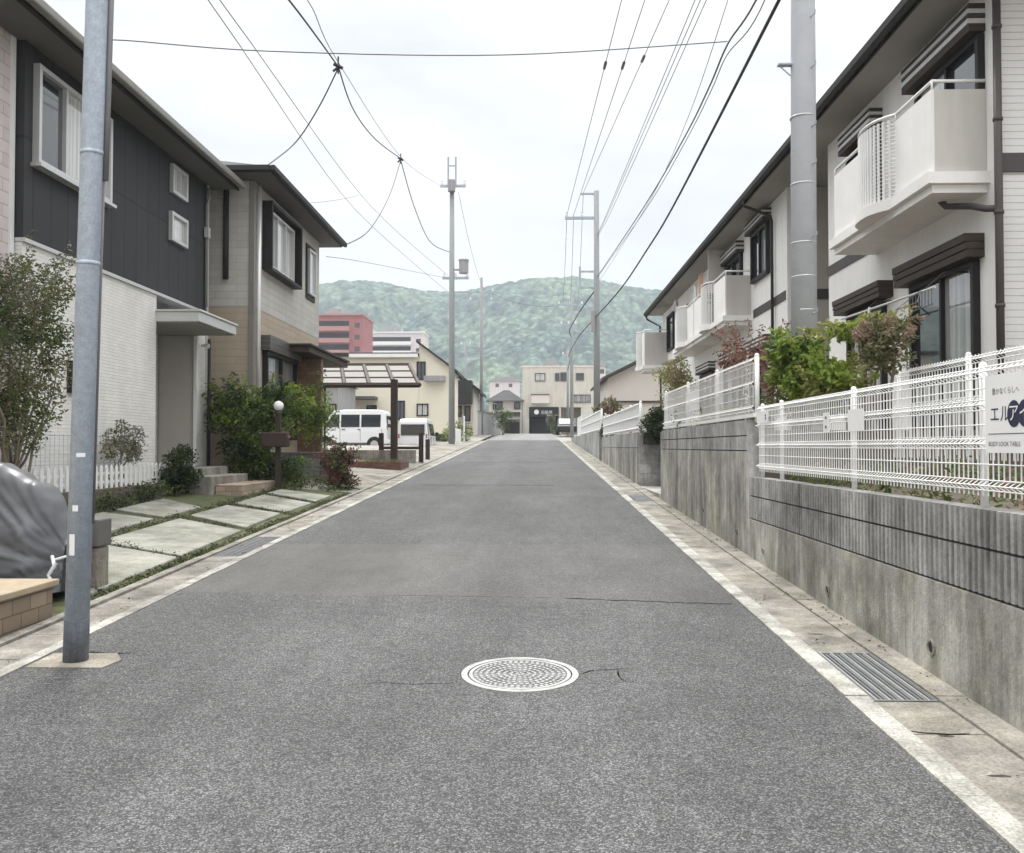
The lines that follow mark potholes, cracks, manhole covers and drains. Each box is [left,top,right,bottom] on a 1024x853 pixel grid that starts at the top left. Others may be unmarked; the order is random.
drain grate [817,652,939,702]
manhole cover [461,657,579,692]
drain grate [214,537,280,556]
